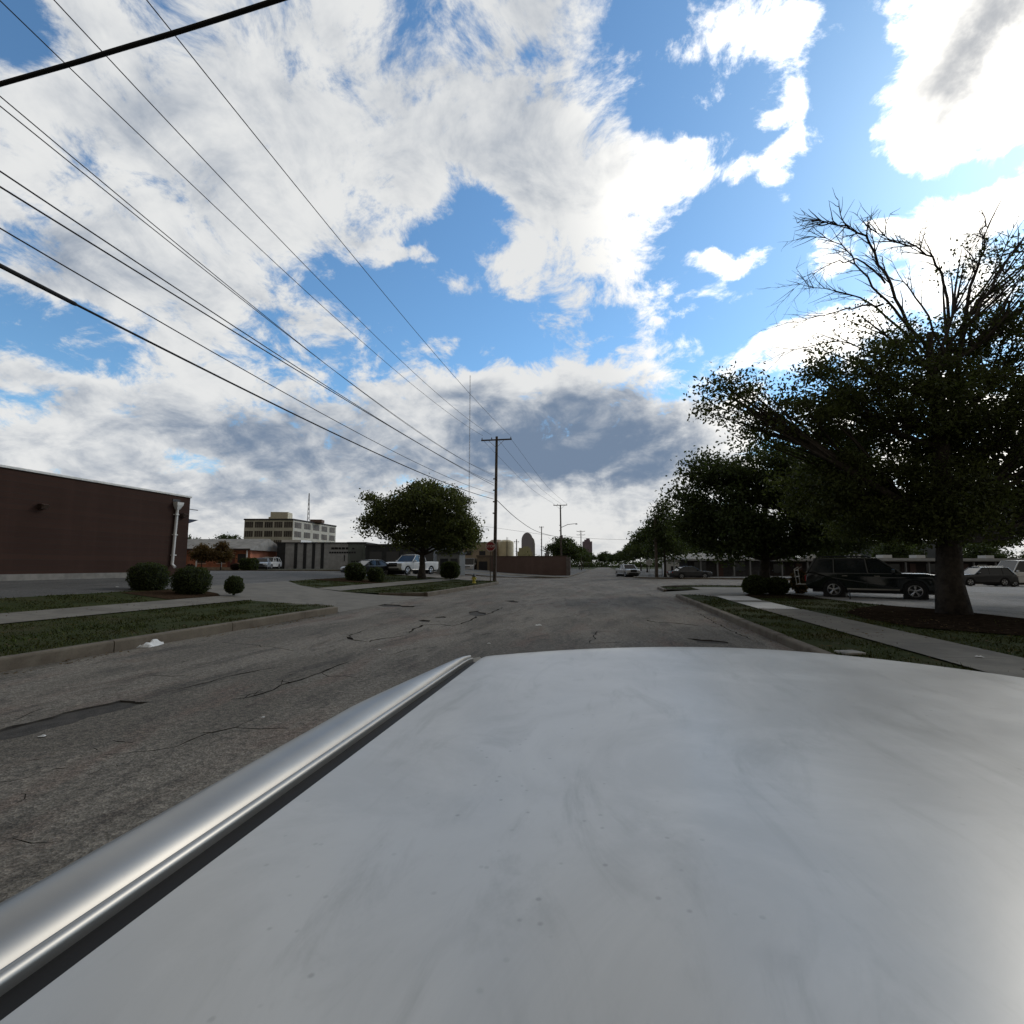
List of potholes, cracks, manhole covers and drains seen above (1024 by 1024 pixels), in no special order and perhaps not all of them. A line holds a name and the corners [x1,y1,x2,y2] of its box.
crack [4,719,277,844]
crack [153,608,502,699]
